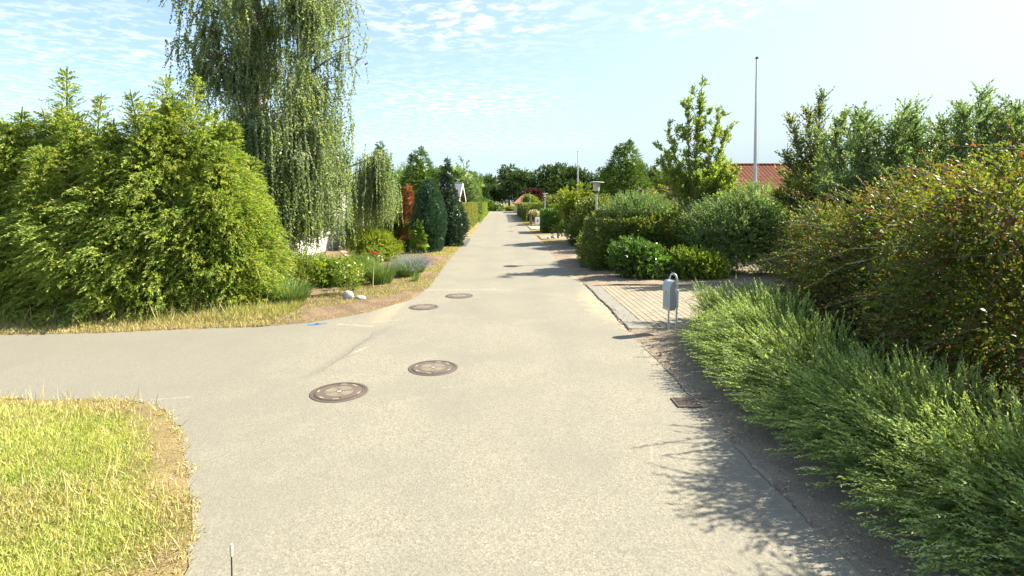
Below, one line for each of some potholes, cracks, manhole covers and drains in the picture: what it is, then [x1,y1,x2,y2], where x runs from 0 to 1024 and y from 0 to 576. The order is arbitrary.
manhole cover [408,360,458,376]
manhole cover [309,382,369,403]
drain grate [670,397,703,408]
